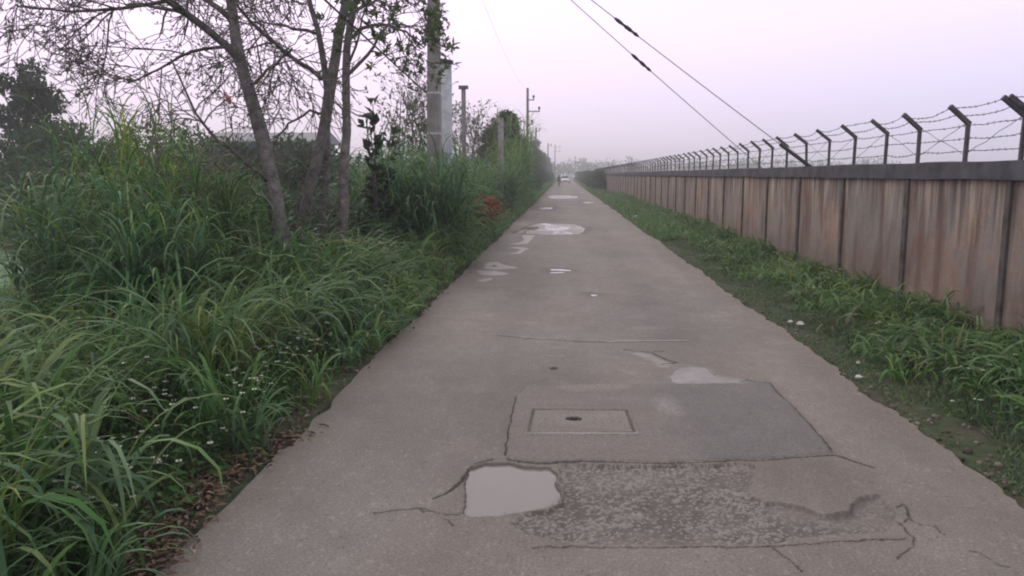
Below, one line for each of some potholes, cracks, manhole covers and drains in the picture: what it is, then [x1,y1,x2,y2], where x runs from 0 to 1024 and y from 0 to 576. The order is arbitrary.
manhole cover [524,407,640,435]
pothole [461,461,563,517]
crack [969,550,1011,568]
crack [373,379,875,526]
crack [623,349,679,365]
